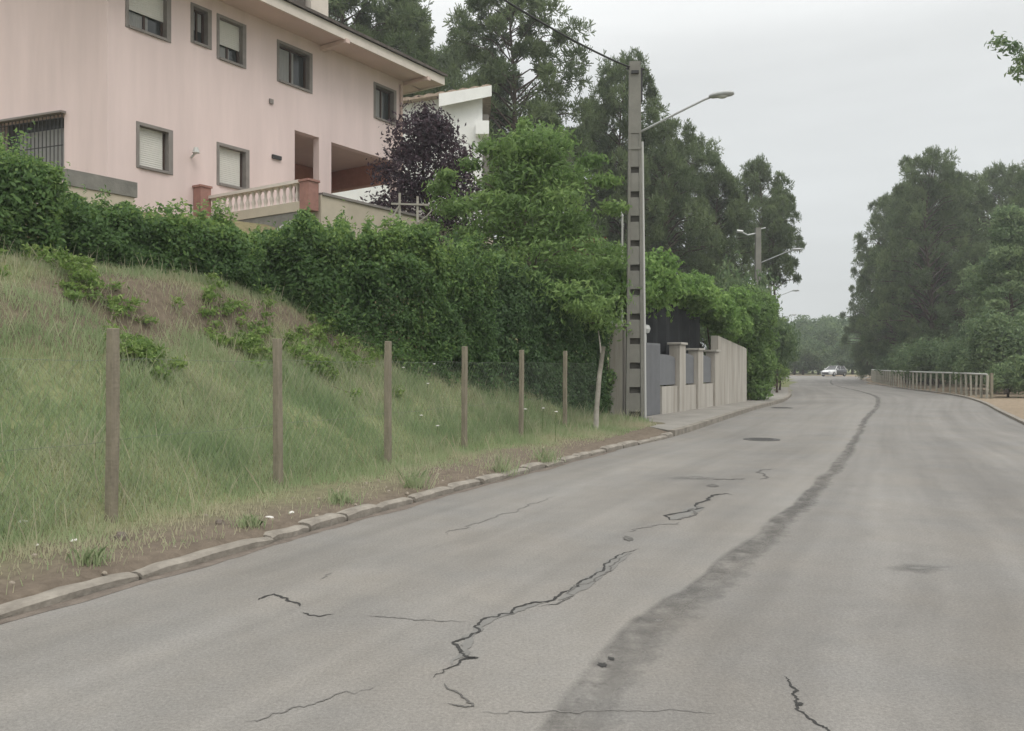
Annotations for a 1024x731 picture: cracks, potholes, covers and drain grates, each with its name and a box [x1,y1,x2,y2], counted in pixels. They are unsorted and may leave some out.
crack [258,593,328,616]
crack [370,549,636,707]
crack [786,677,830,731]
crack [248,684,380,721]
crack [633,469,770,531]
